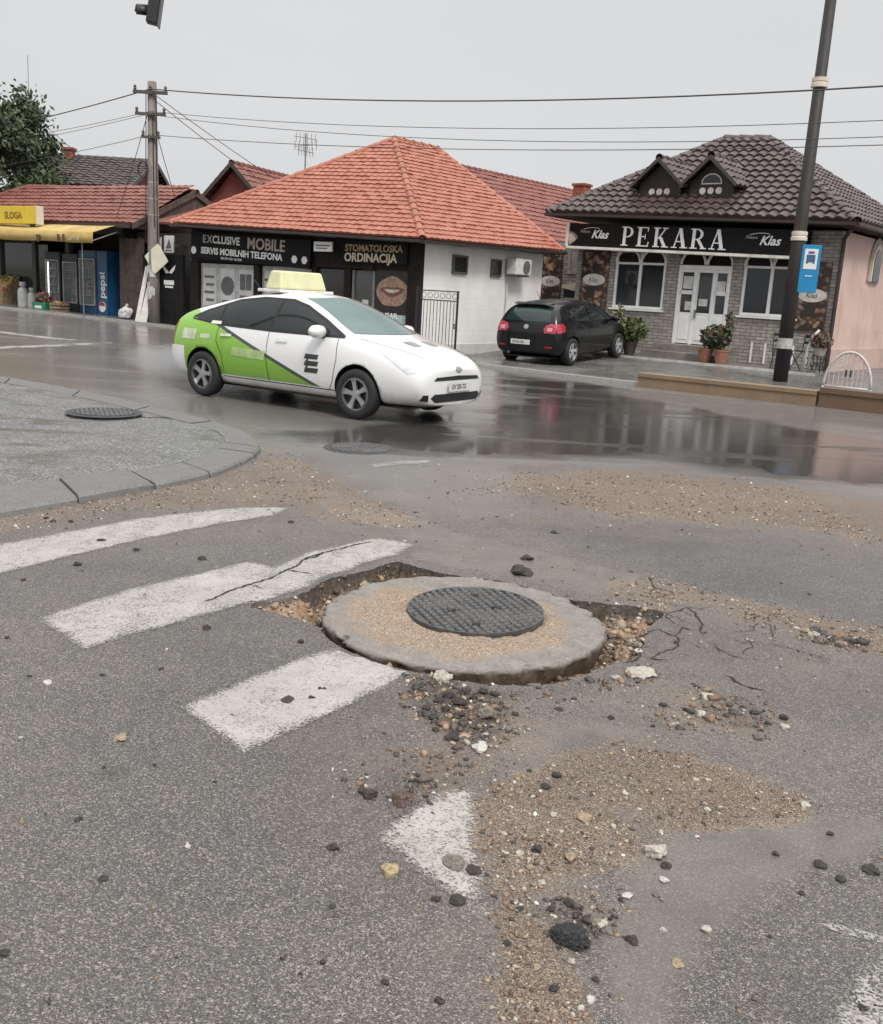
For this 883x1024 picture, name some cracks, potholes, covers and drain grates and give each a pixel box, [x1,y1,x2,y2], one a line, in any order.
manhole cover [321,576,608,686]
crack [620,577,823,662]
manhole cover [323,442,397,455]
crack [205,541,372,601]
manhole cover [65,407,143,419]
